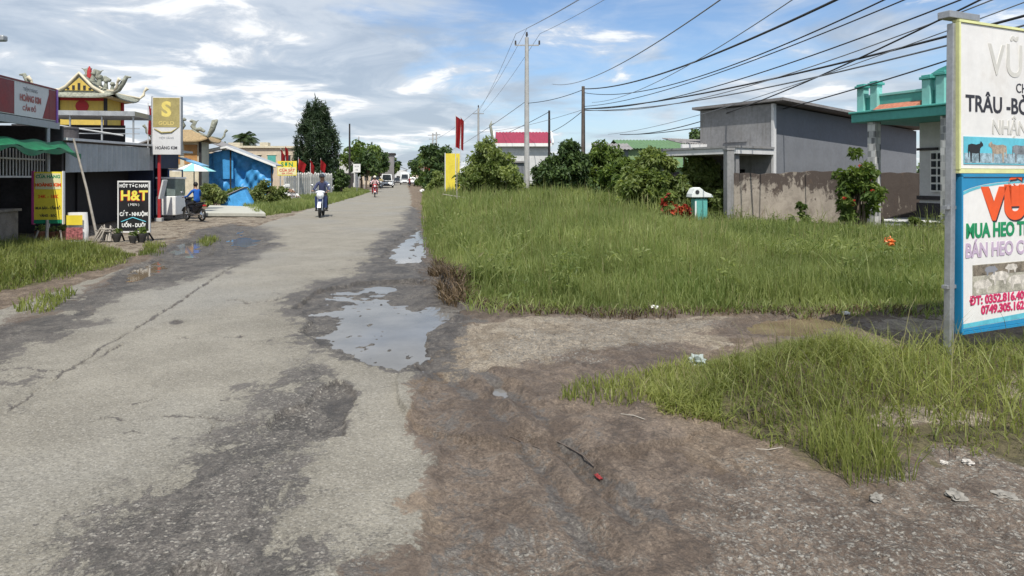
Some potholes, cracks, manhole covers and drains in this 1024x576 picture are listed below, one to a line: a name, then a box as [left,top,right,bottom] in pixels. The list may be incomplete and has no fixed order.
crack [2,266,282,436]
pothole [378,229,427,264]
pothole [291,275,463,371]
